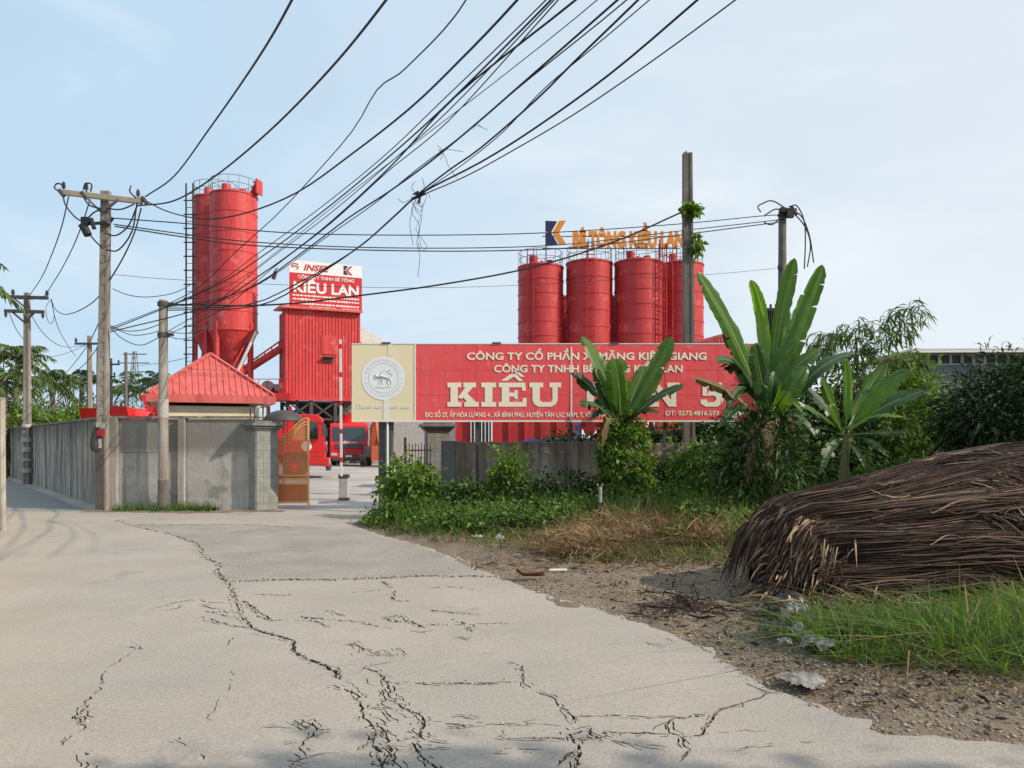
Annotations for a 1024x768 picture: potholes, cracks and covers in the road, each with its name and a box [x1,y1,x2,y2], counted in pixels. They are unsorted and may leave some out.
crack [114,520,816,768]
crack [61,645,142,768]
